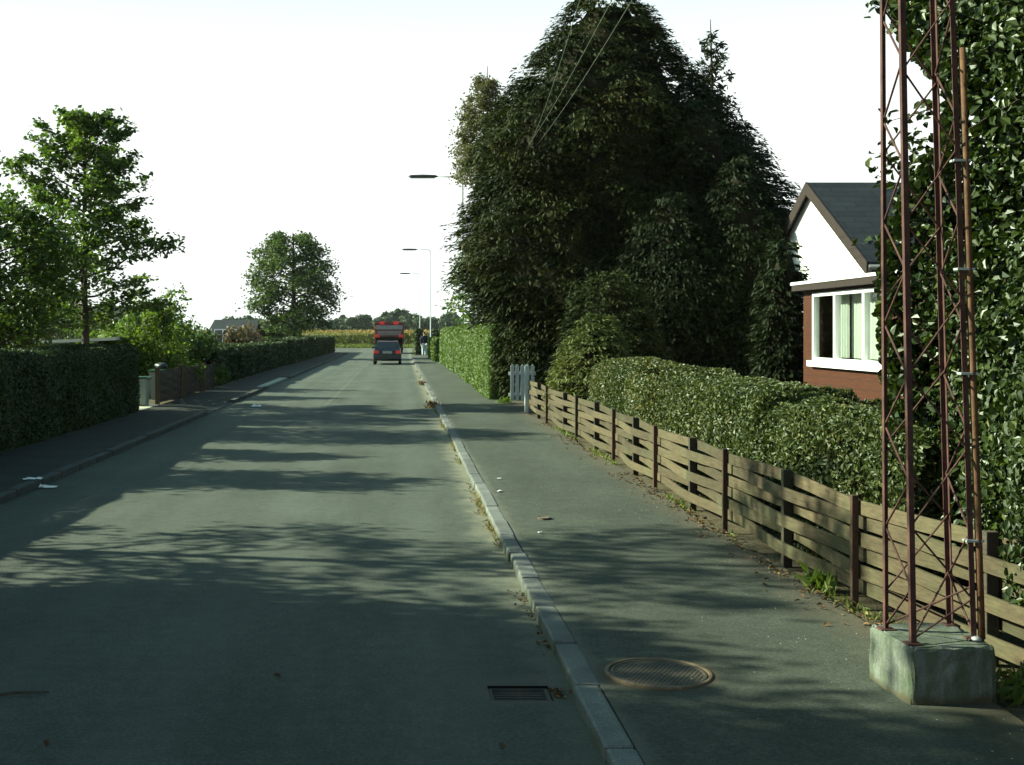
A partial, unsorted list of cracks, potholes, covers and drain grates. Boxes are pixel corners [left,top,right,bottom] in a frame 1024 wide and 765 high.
manhole cover [604,657,714,690]
drain grate [487,686,554,701]
